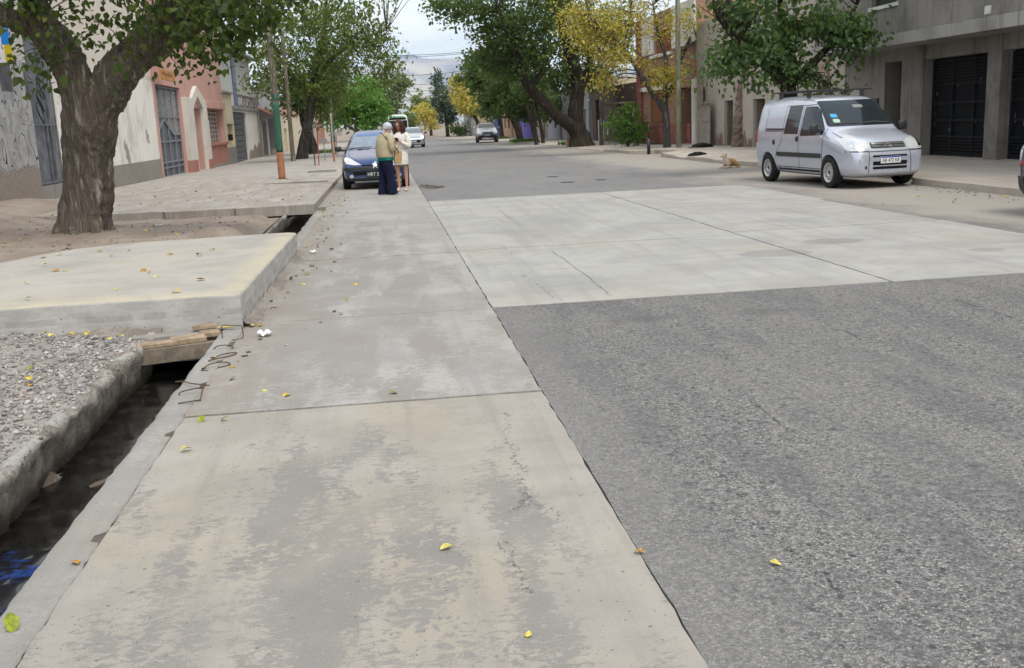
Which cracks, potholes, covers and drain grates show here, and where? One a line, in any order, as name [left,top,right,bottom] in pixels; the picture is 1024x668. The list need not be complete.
crack [498,541,535,593]
crack [502,412,562,522]
